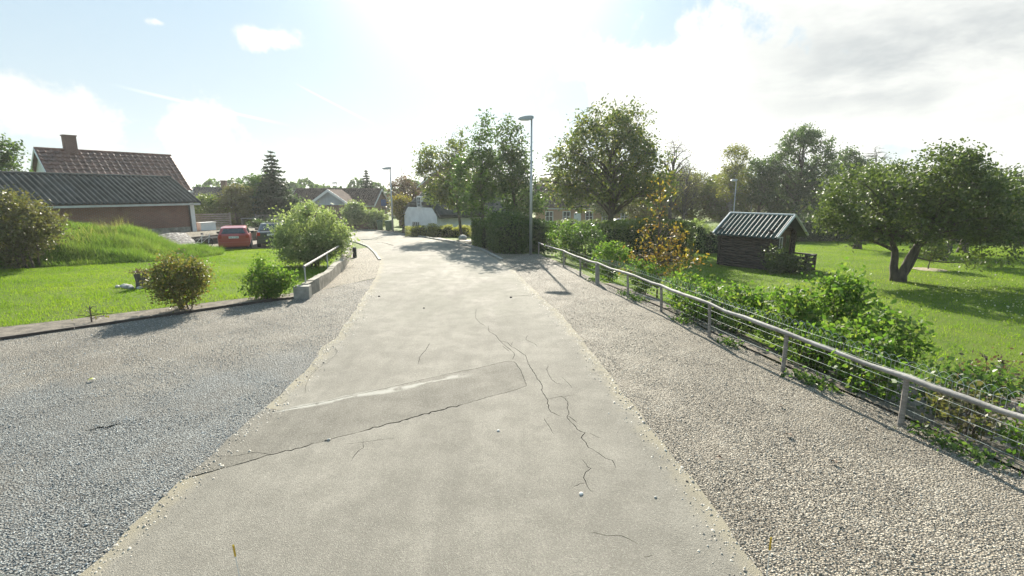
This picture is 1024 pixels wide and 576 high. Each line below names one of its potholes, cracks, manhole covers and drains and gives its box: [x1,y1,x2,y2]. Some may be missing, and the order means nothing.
crack [484,325,616,491]
